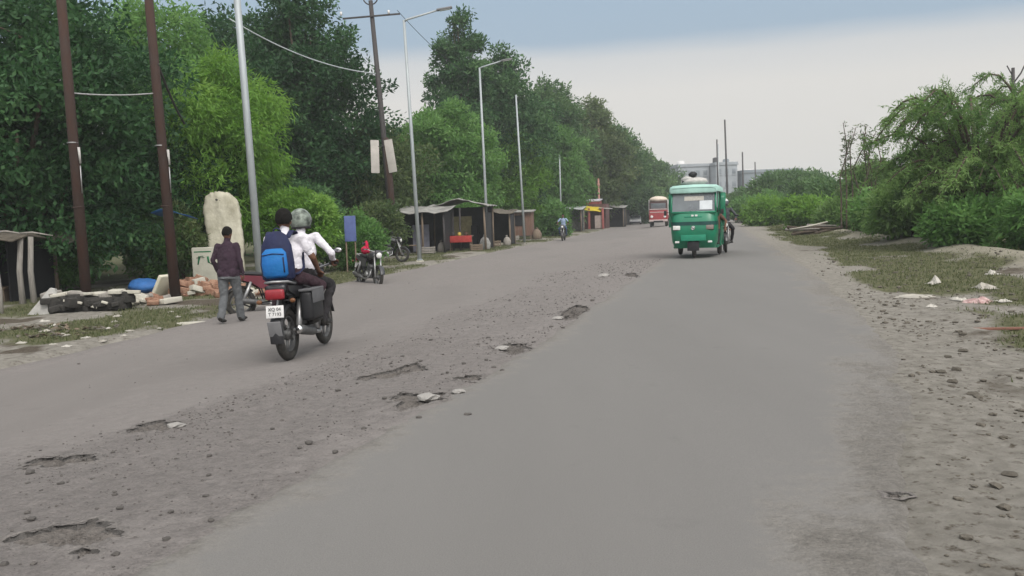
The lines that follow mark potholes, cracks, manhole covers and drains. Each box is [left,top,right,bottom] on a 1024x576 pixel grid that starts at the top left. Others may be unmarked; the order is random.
pothole [558,305,591,321]
pothole [352,361,435,381]
pothole [876,490,918,500]
pothole [384,391,453,412]
pothole [0,514,138,552]
pothole [118,418,197,436]
pothole [11,453,106,471]
pothole [62,545,107,562]
pothole [488,342,535,356]
pothole [447,374,487,382]
